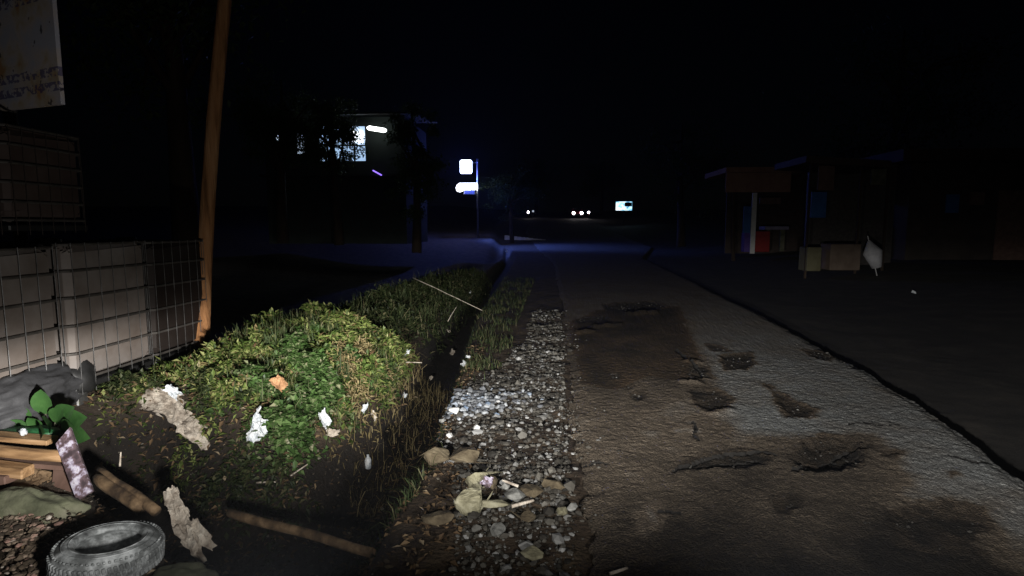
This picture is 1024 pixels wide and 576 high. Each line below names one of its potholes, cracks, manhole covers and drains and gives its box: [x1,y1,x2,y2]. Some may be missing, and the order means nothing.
pothole [677,447,775,471]
crack [675,349,706,378]
pothole [718,351,757,371]
pothole [771,390,821,419]
pothole [688,387,736,412]
pothole [602,301,665,312]
pothole [800,349,835,361]
pothole [786,432,874,473]
